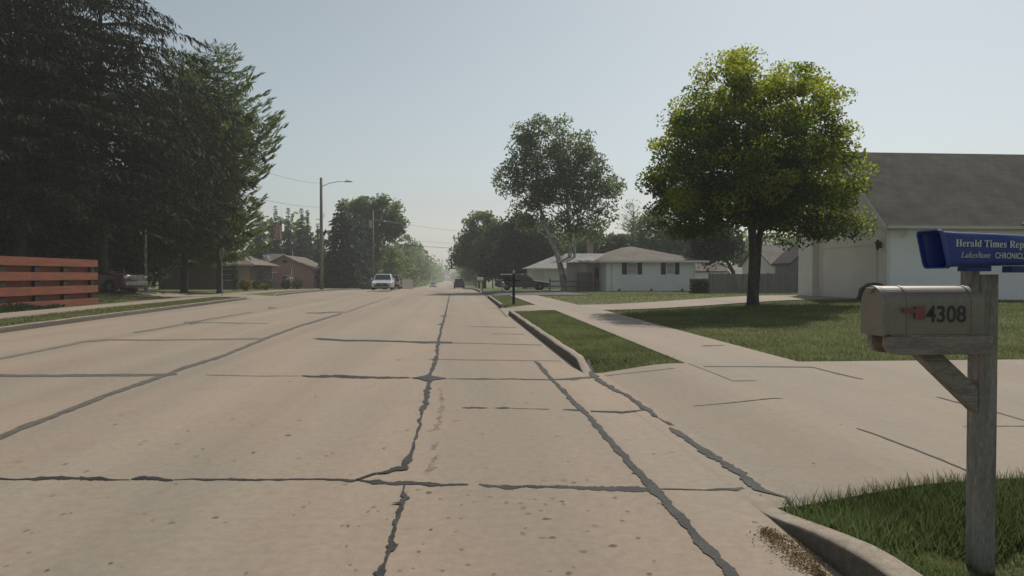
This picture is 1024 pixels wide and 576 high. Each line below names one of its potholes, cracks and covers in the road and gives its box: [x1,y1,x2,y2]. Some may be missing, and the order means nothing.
crack [174,294,591,576]
